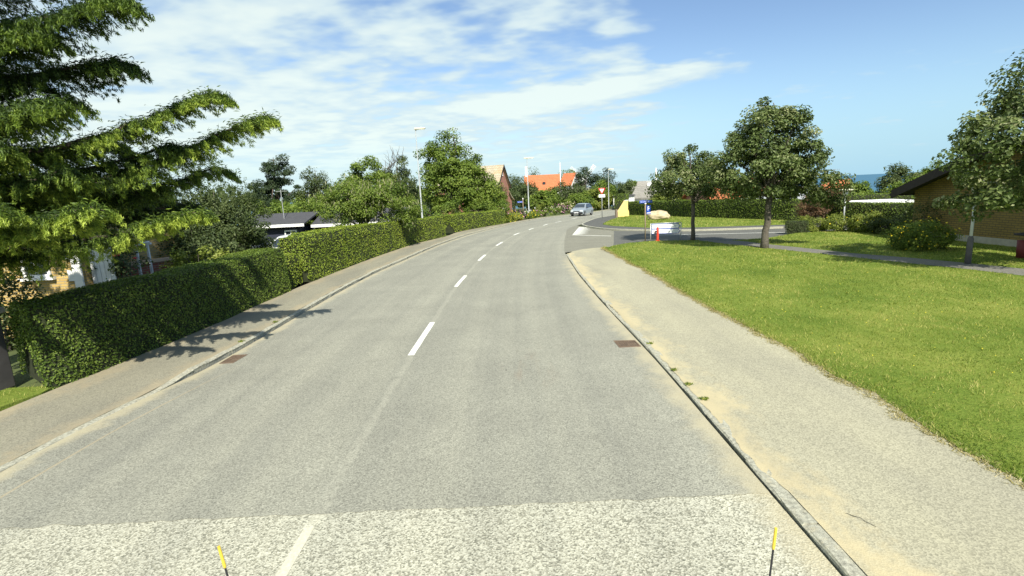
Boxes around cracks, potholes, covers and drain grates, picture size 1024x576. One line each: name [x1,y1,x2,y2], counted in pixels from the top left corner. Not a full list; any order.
drain grate [613,340,641,348]
drain grate [219,354,248,364]
